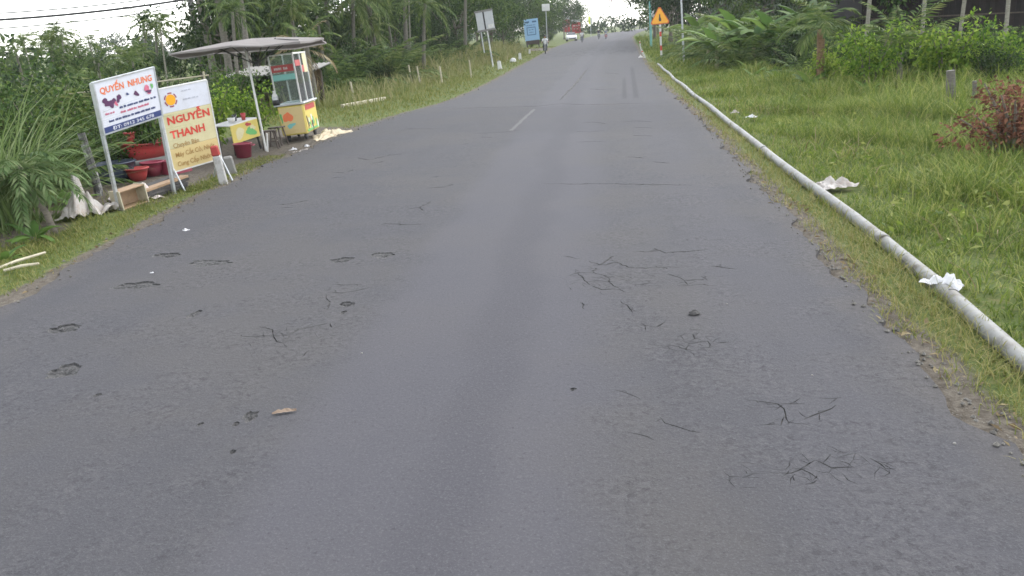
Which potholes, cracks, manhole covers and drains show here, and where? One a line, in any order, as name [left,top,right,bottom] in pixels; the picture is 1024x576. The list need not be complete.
pothole [44,362,83,379]
pothole [188,260,233,268]
crack [617,390,702,440]
pothole [110,281,161,289]
pothole [46,323,82,334]
crack [566,248,736,360]
crack [229,282,367,359]
crack [753,397,841,425]
crack [709,447,919,496]
